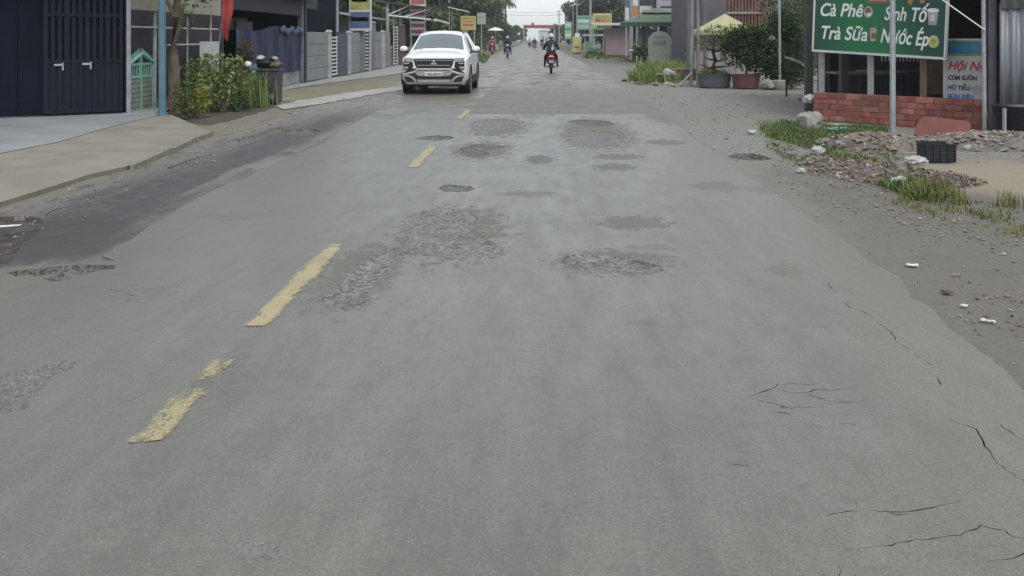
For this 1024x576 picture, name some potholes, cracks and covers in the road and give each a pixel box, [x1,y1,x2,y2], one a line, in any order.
pothole [470,119,520,135]
pothole [562,255,664,273]
pothole [9,264,116,282]
pothole [566,130,623,148]
crack [867,526,1024,563]
pothole [399,209,505,261]
pothole [567,119,615,127]
pothole [727,153,770,161]
pothole [460,144,512,158]
pothole [320,246,410,311]
